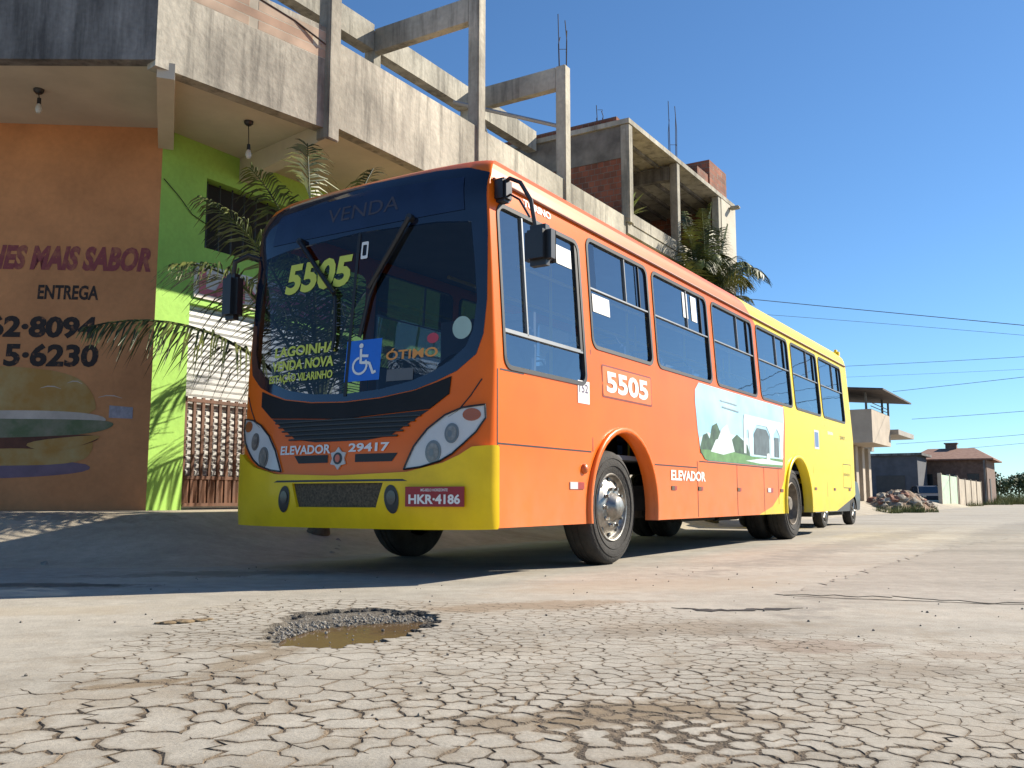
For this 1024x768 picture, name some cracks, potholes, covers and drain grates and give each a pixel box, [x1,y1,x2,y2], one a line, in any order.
pothole [253,607,442,649]
